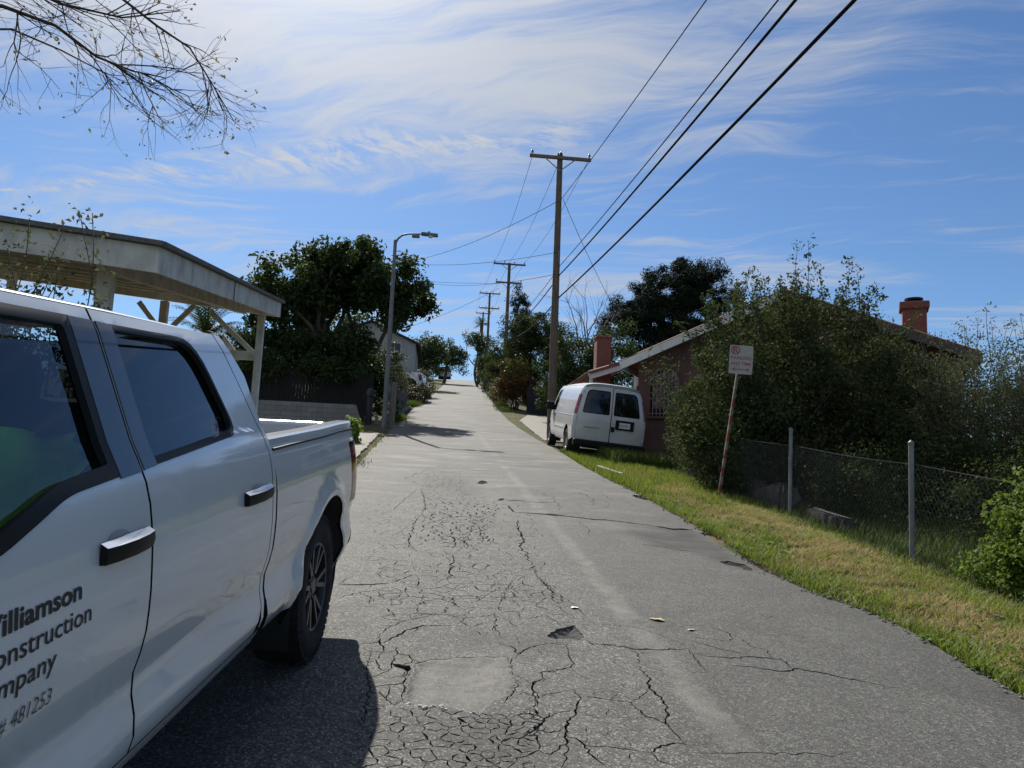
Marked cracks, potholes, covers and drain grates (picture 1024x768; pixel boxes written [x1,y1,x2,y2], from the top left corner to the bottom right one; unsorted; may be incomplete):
pothole [719,561,752,571]
pothole [547,625,584,640]
crack [339,465,902,768]
